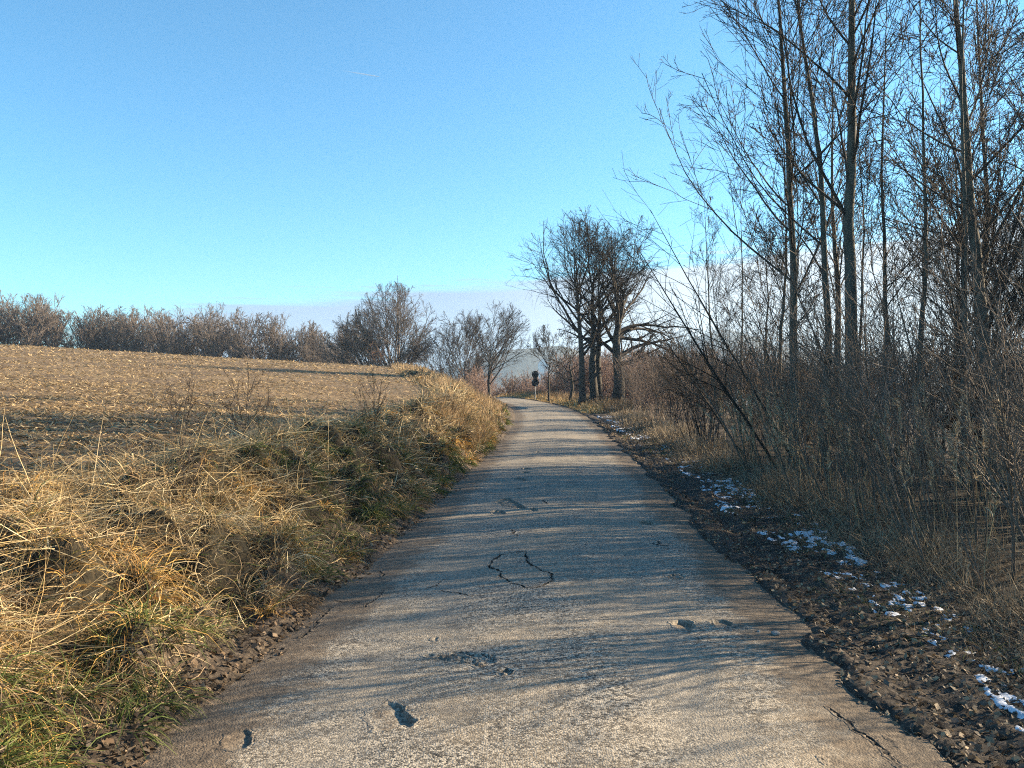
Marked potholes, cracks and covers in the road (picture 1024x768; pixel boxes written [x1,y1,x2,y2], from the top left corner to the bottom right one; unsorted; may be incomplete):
pothole [361,699,421,733]
pothole [706,618,735,628]
pothole [667,618,698,631]
crack [815,705,905,768]
pothole [419,650,501,668]
crack [424,529,556,597]
pothole [215,727,256,753]
pothole [493,667,516,678]
crack [296,571,387,639]
